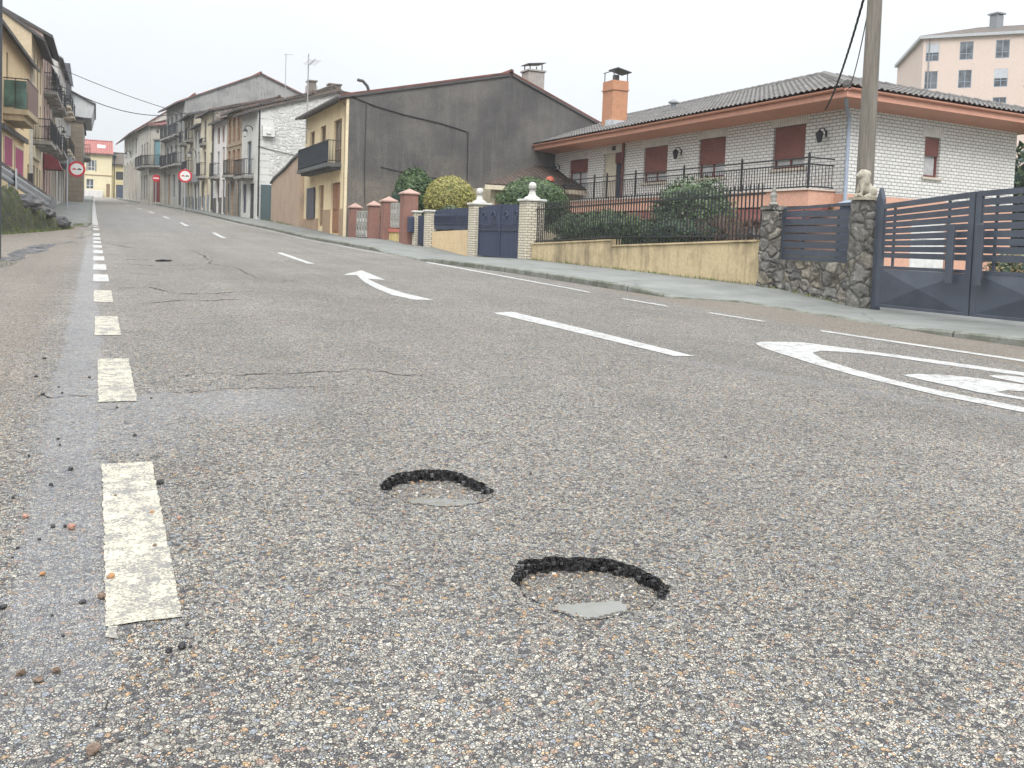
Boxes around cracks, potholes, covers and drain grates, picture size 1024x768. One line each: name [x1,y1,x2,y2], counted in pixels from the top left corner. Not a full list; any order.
pothole [380,468,497,507]
crack [111,244,294,304]
crack [167,368,425,382]
pothole [510,556,670,620]
